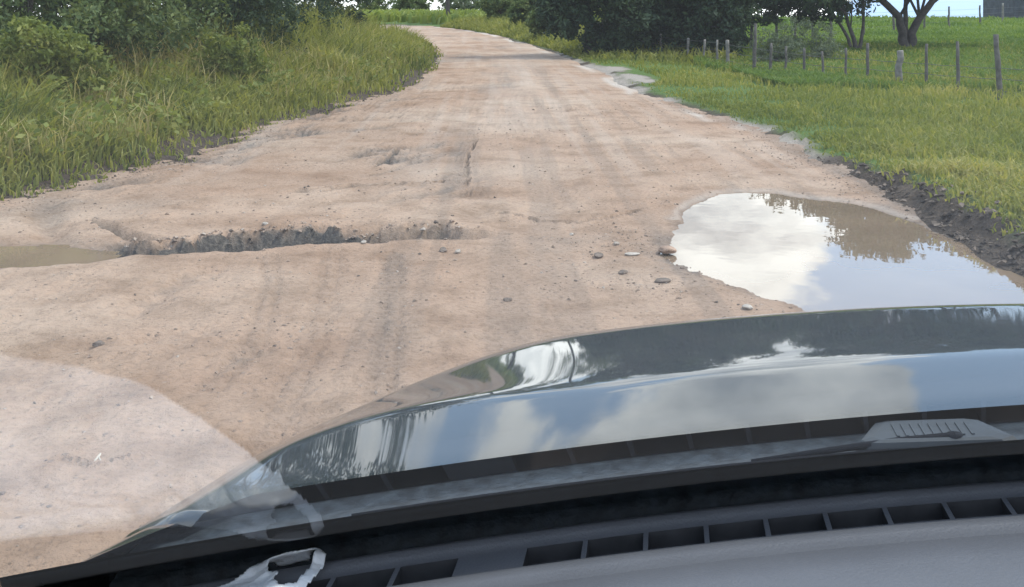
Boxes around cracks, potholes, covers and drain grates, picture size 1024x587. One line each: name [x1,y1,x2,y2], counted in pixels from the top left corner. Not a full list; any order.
pothole [653,188,1024,312]
crack [282,139,643,225]
pothole [0,242,121,269]
